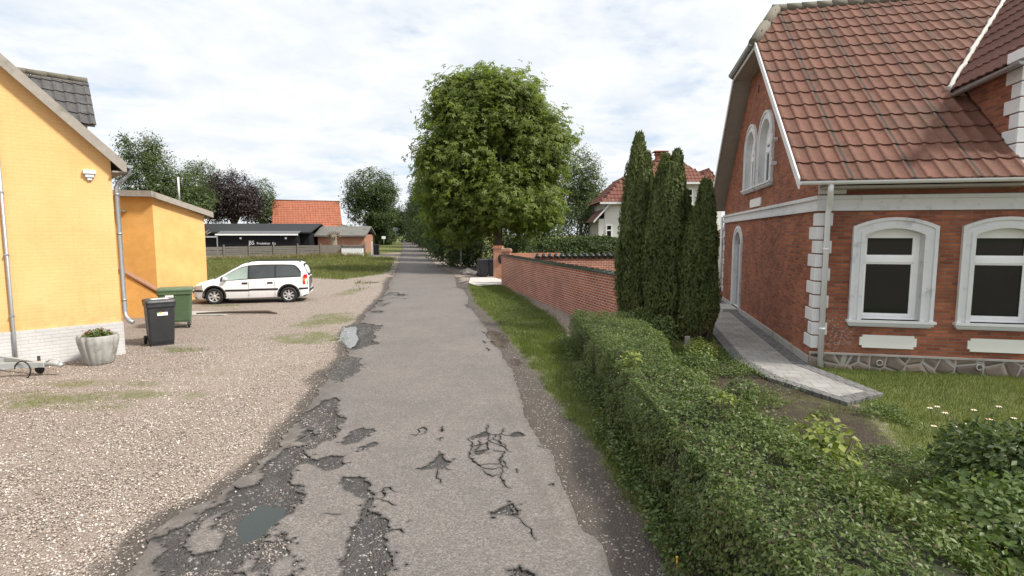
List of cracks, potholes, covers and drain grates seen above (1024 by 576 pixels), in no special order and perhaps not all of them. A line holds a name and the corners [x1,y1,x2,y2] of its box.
pothole [340,476,393,505]
pothole [148,445,316,576]
pothole [507,565,535,576]
pothole [324,358,363,382]
pothole [338,498,408,576]
pothole [296,397,346,448]
pothole [337,427,375,445]
pothole [309,455,351,471]
pothole [336,323,382,350]
crack [468,425,541,488]
pothole [416,451,454,483]
